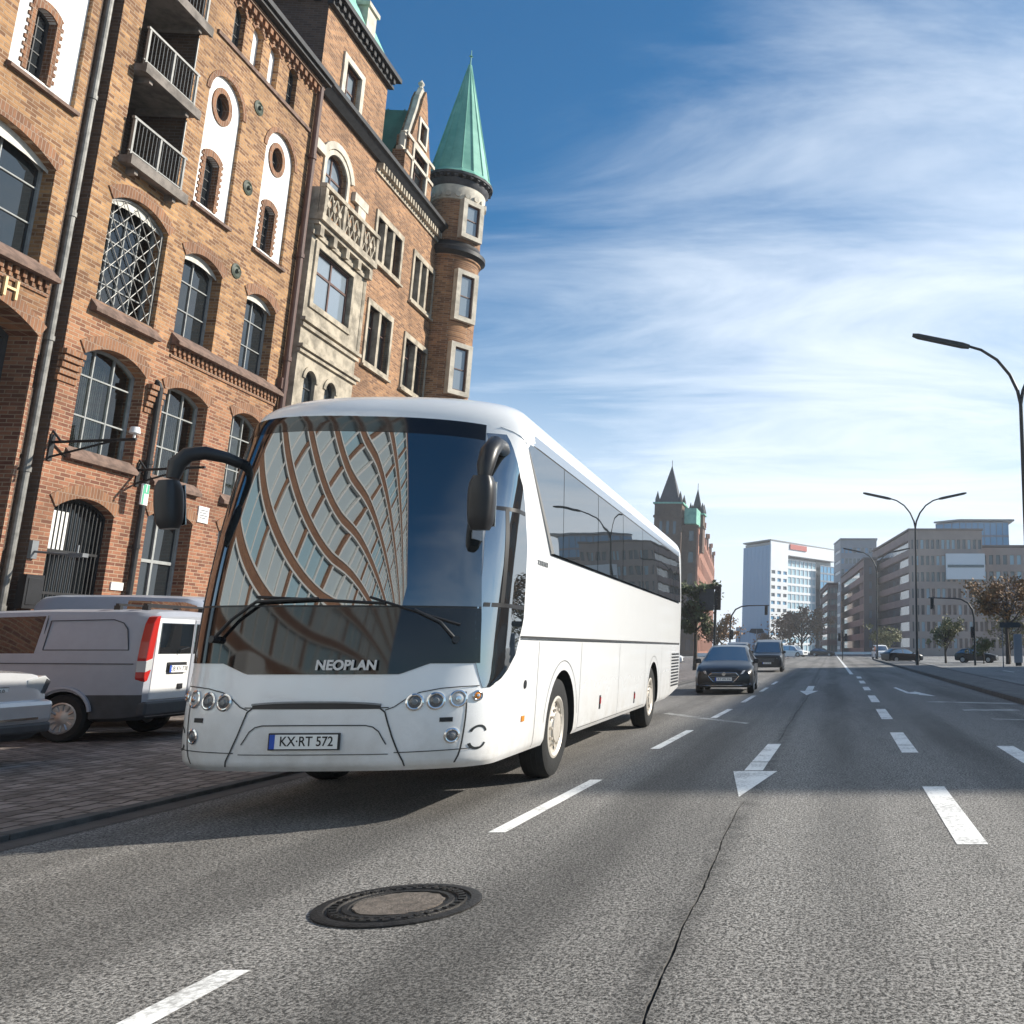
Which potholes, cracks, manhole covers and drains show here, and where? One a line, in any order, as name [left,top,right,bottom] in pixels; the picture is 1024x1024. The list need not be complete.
crack [641,803,743,1024]
manhole cover [310,883,482,929]
